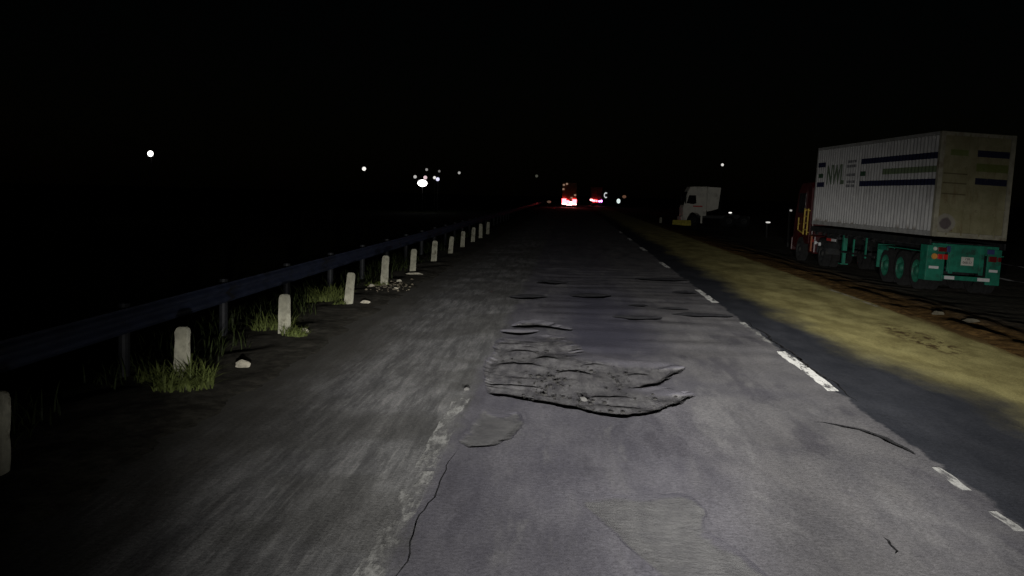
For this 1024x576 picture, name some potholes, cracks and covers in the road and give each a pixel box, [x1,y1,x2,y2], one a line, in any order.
crack [396,451,457,576]
pothole [511,319,573,331]
crack [823,422,916,455]
pothole [483,334,695,418]
